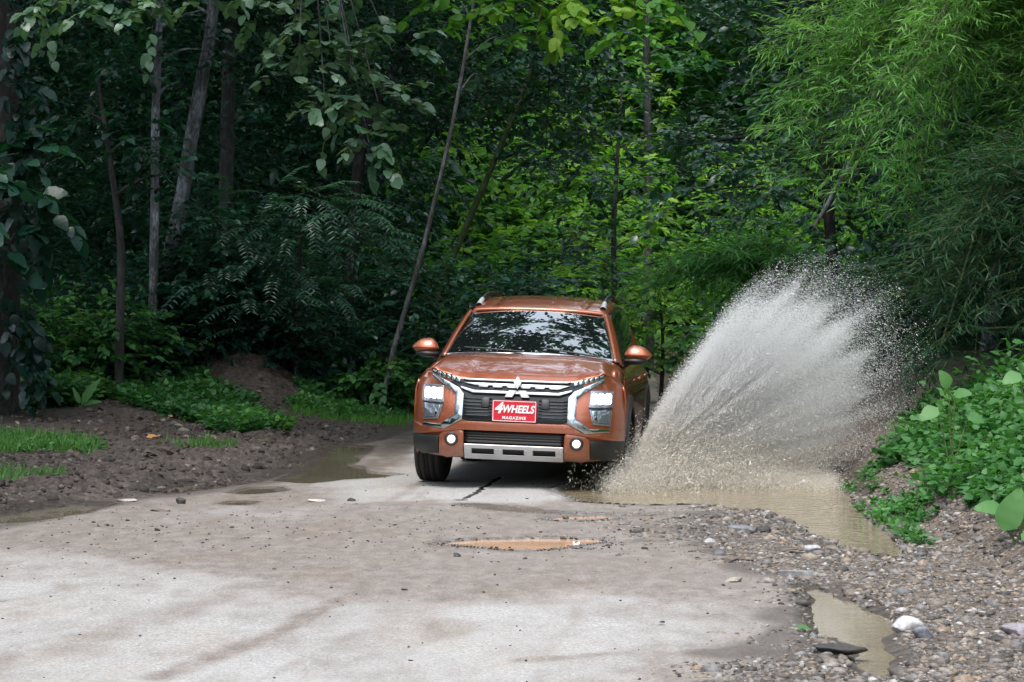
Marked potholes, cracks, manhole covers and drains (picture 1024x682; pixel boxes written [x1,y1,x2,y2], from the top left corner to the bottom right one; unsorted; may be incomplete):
pothole [551,475,906,557]
crack [458,477,507,500]
pothole [436,536,608,550]
